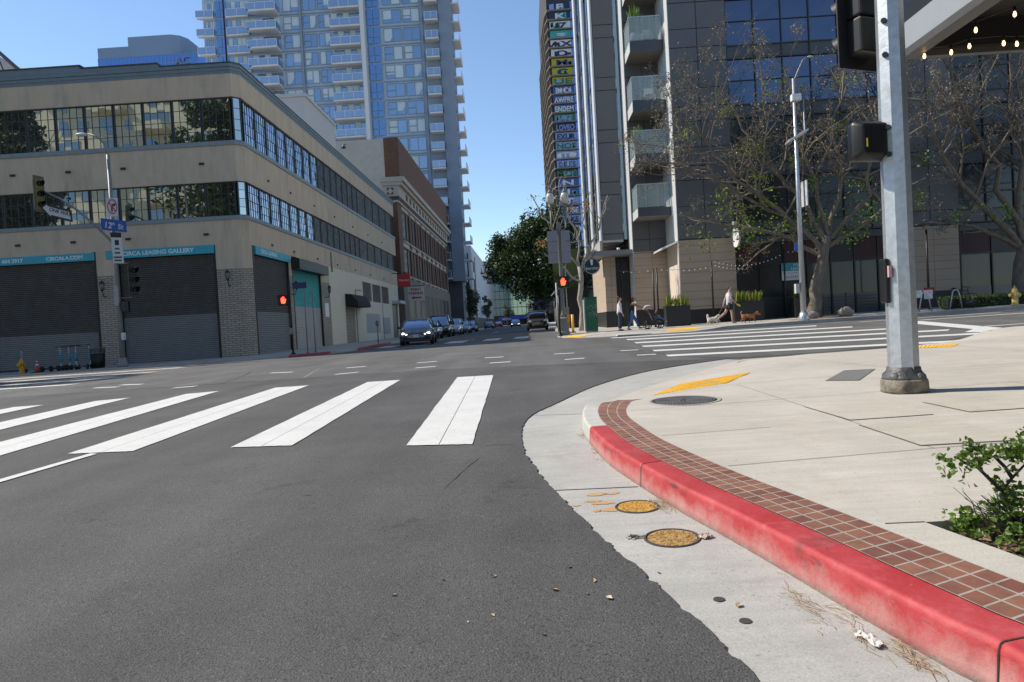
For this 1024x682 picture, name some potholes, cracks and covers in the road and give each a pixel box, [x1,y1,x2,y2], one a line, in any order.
manhole cover [643,528,702,548]
manhole cover [615,500,660,513]
utility cover [827,369,875,381]
manhole cover [648,395,722,406]
